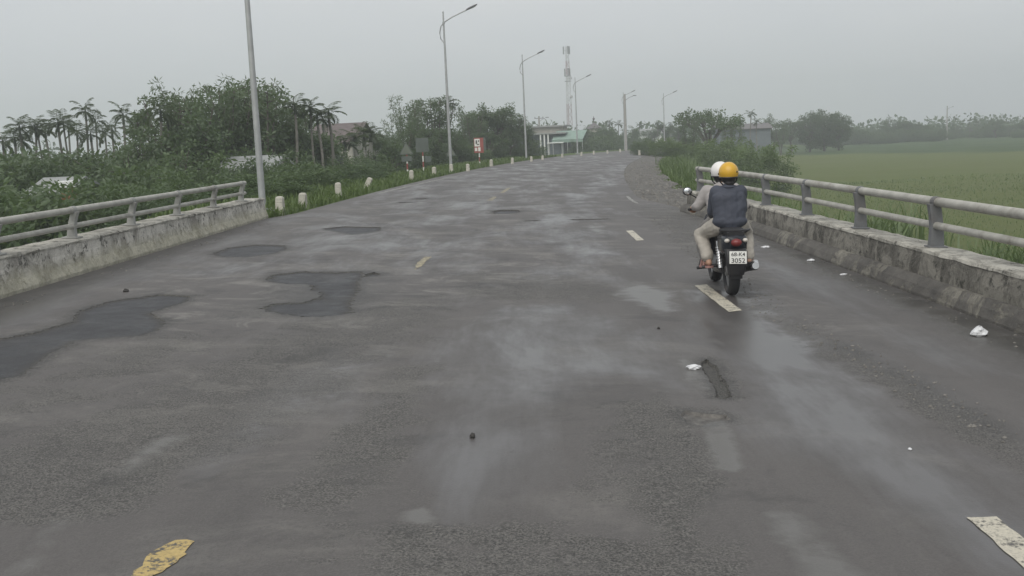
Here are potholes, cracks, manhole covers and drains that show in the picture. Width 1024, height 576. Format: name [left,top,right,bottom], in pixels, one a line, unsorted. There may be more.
pothole [701,359,732,400]
